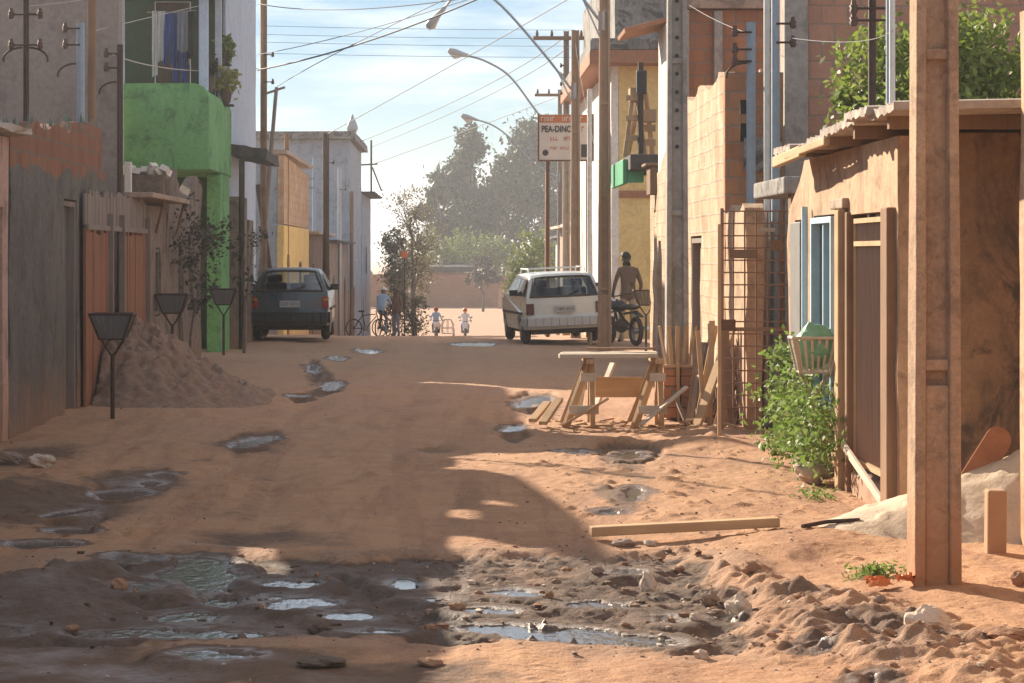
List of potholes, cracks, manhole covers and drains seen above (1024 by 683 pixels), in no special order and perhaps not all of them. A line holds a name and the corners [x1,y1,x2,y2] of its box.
pothole [489,420,542,444]
pothole [283,376,351,405]
pothole [579,436,676,465]
pothole [300,358,329,383]
pothole [218,427,295,455]
pothole [498,390,566,415]
pothole [28,505,113,538]
pothole [83,468,190,505]
pothole [0,543,802,662]
